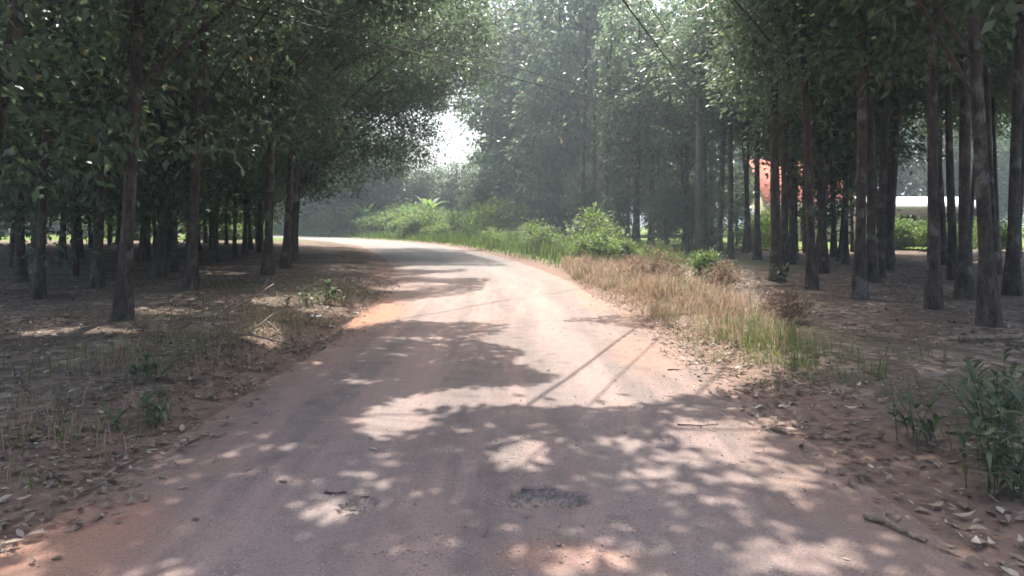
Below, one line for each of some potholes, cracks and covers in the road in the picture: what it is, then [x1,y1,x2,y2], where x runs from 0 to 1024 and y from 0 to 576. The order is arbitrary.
pothole [320,489,396,522]
pothole [491,481,605,515]
